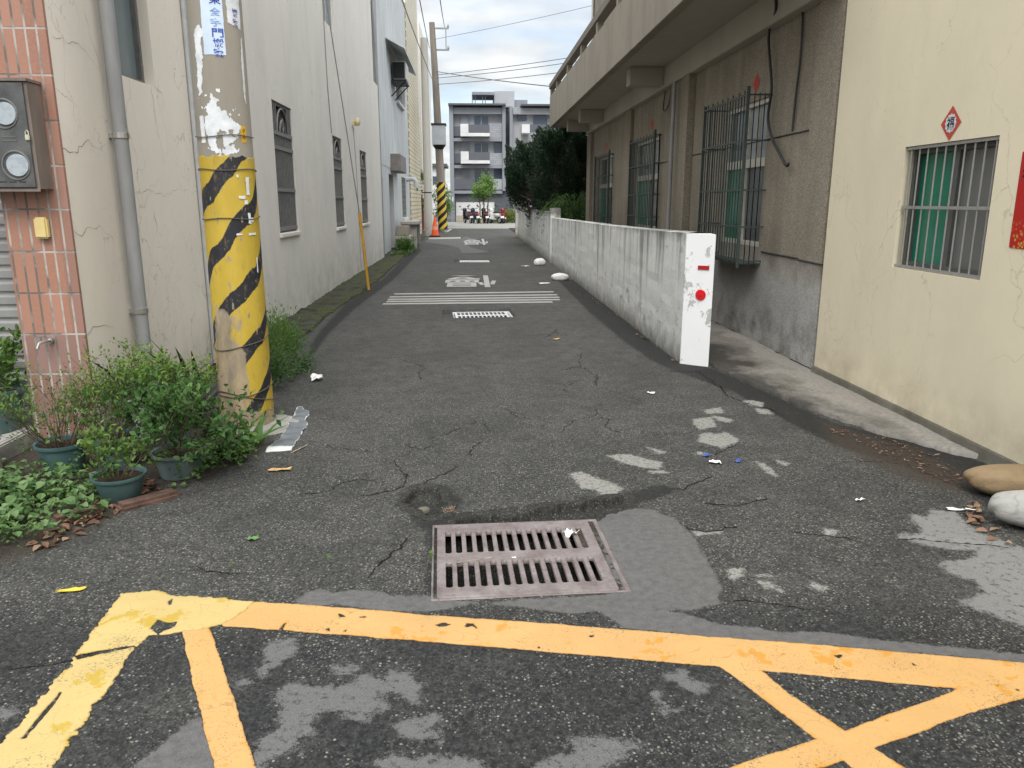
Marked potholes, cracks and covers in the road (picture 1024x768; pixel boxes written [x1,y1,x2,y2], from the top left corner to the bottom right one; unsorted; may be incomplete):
crack [303,406,526,497]
drain grate [431,519,631,601]
pothole [395,482,458,522]
crack [368,537,408,577]
